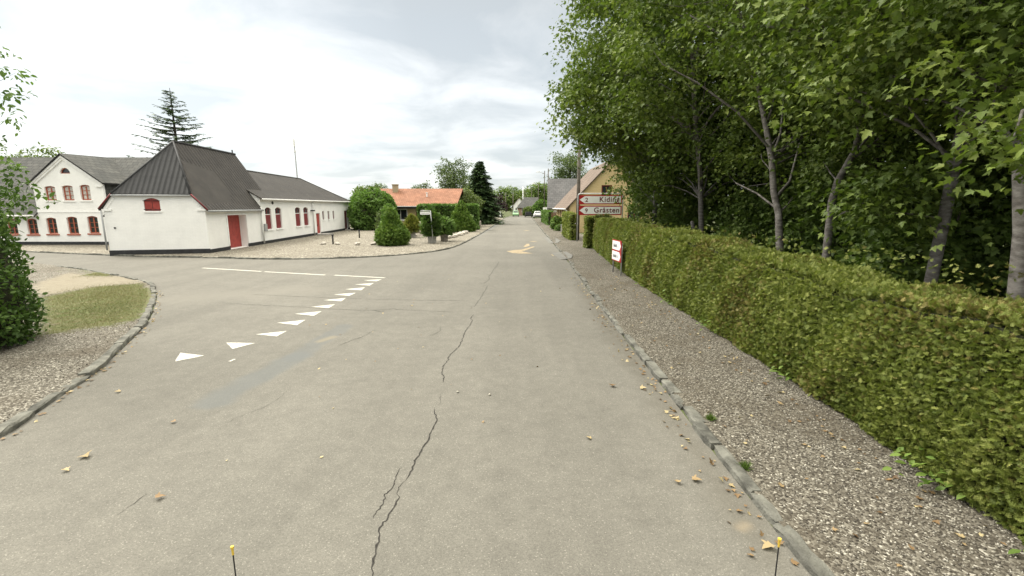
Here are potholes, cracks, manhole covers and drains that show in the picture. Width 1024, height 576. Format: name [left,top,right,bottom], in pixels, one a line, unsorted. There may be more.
crack [228,262,499,576]
